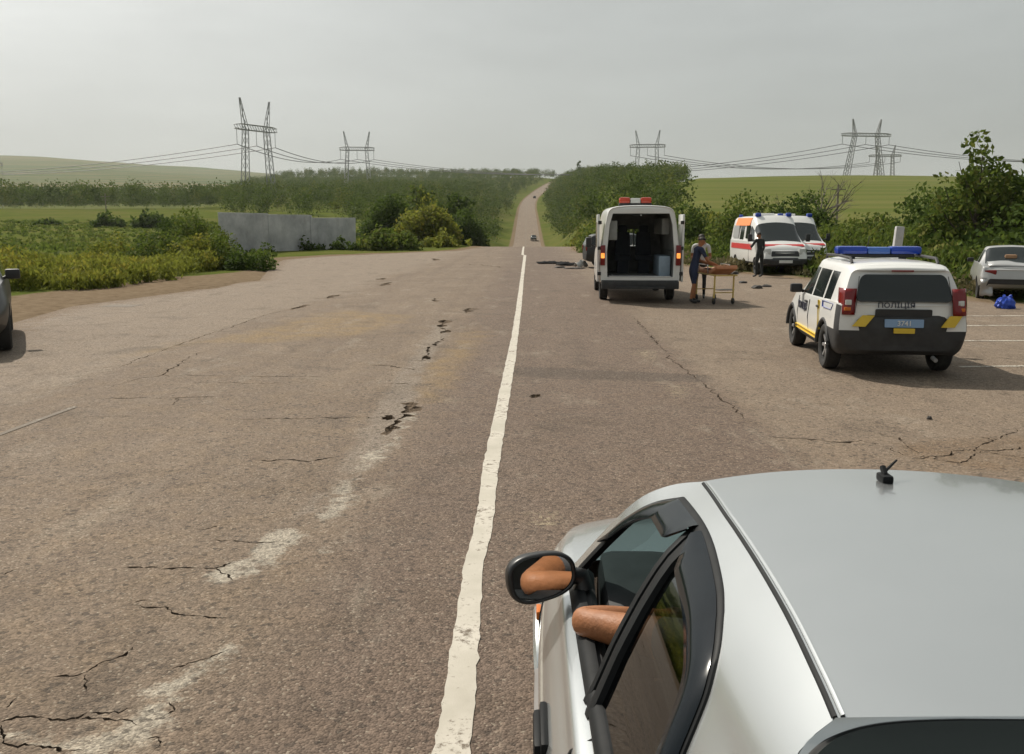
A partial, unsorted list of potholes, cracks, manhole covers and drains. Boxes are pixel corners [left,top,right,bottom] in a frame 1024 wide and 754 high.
crack [121,561,233,580]
crack [40,647,133,690]
pothole [381,402,422,435]
crack [0,698,162,752]
crack [769,429,1024,463]
crack [105,375,337,405]
crack [136,599,229,619]
